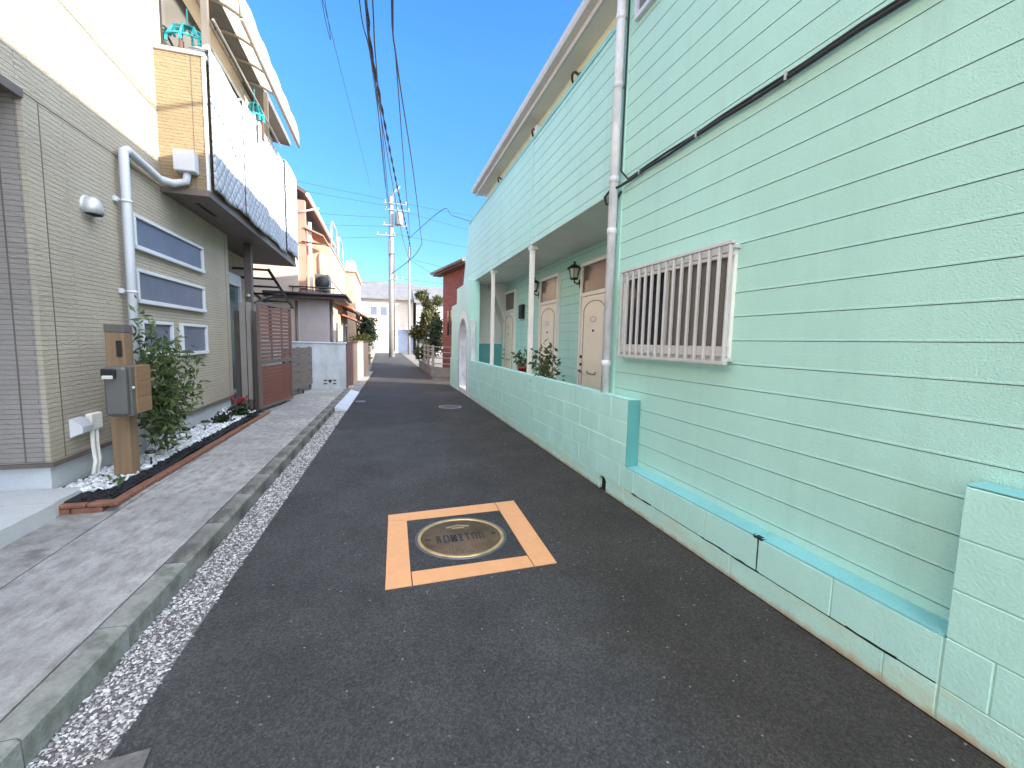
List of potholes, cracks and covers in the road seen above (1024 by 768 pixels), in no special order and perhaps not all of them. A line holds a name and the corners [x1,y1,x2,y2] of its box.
manhole cover [415,518,506,560]
